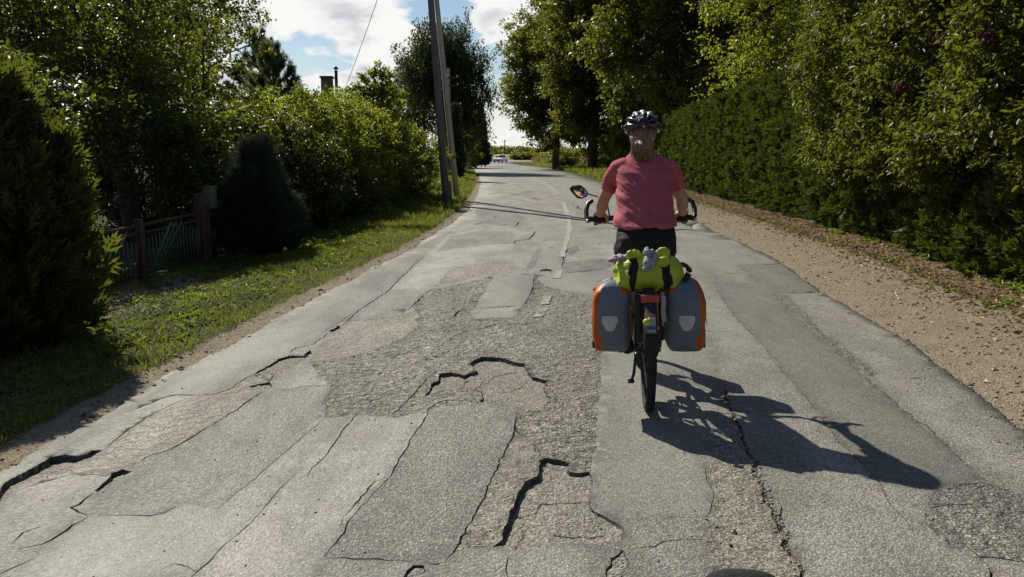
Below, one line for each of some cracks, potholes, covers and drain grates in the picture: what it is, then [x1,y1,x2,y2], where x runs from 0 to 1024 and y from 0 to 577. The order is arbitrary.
crack [163,289,538,577]
